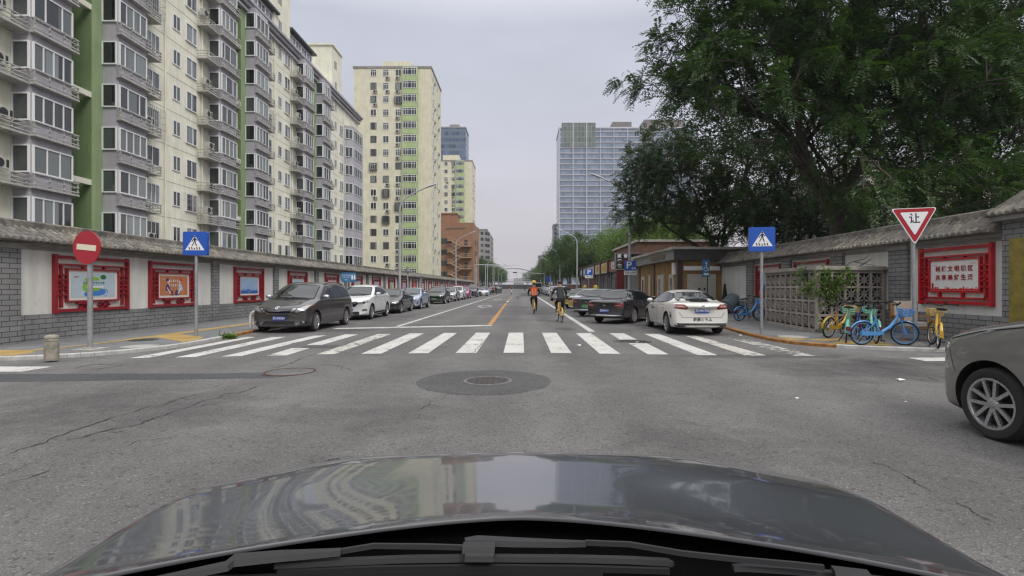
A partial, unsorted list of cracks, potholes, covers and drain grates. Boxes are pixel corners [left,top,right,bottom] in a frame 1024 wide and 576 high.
crack [4,384,255,484]
manhole cover [261,368,316,376]
manhole cover [463,376,512,385]
